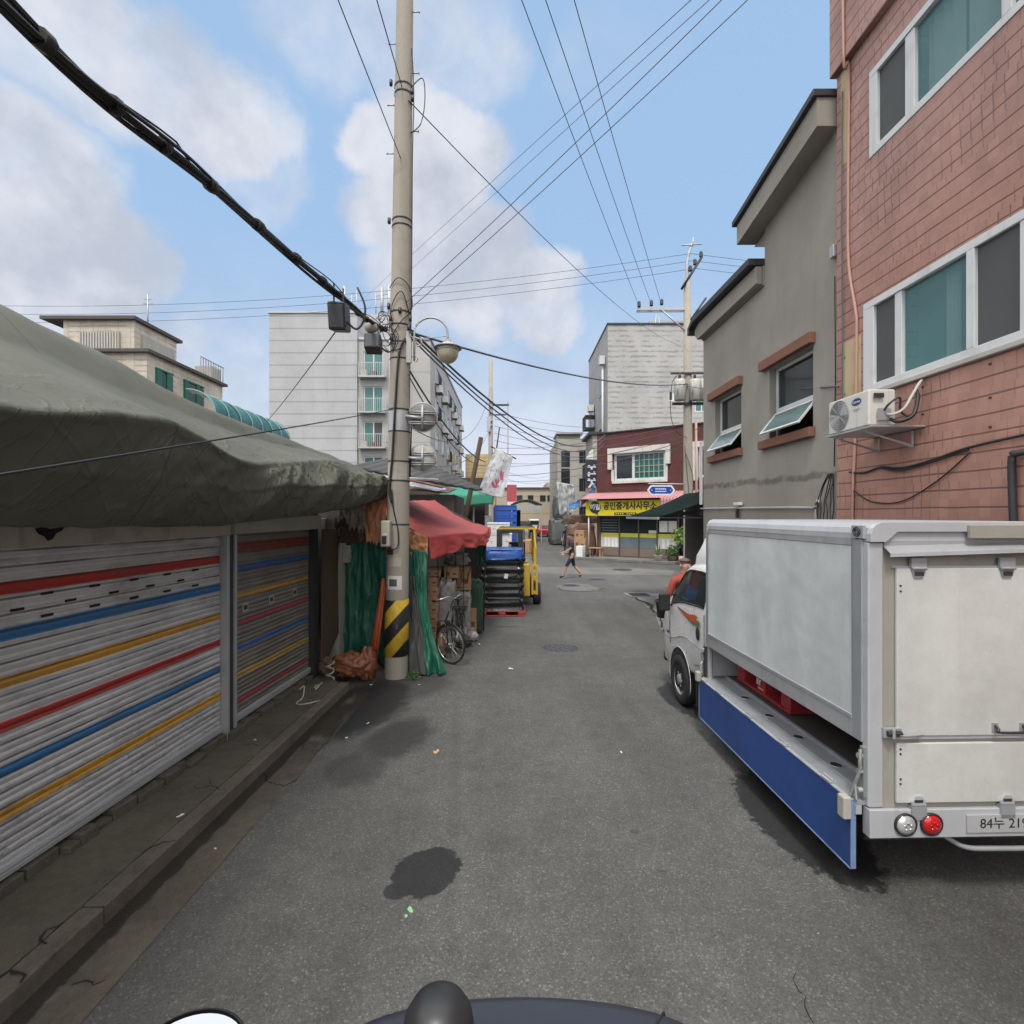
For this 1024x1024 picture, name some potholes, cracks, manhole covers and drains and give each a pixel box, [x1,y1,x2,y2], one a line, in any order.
manhole cover [541,643,579,654]
crack [792,972,814,1024]
